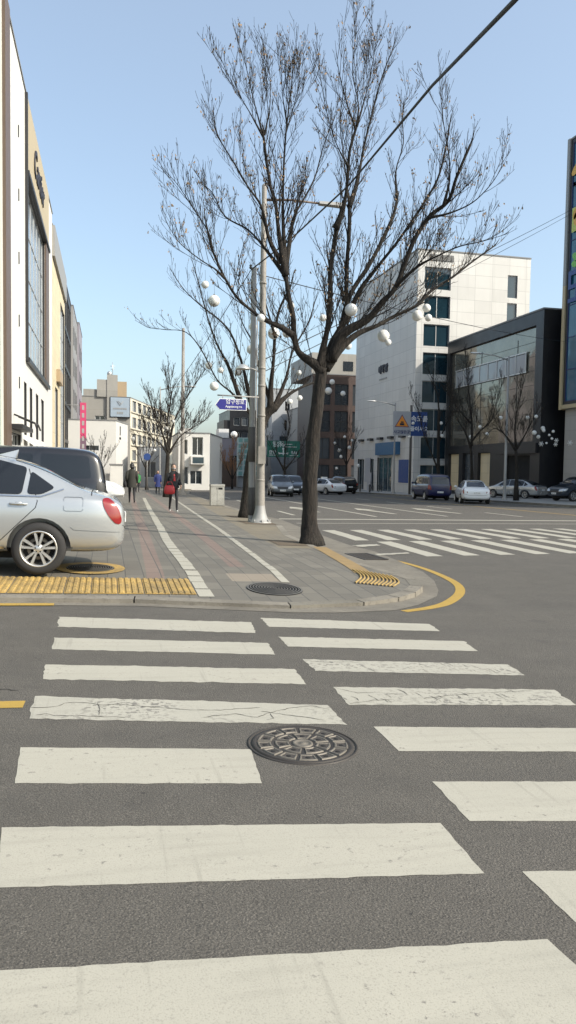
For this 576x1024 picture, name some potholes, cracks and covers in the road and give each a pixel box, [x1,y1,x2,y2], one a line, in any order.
manhole cover [56,562,125,574]
crack [33,702,325,720]
manhole cover [247,725,358,766]
crack [308,660,530,704]
manhole cover [247,582,303,596]
